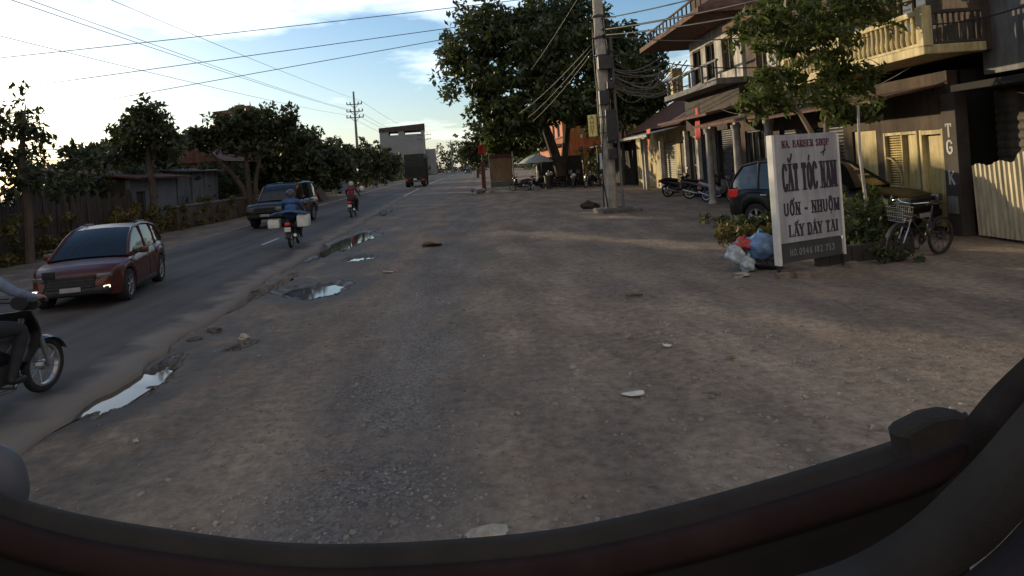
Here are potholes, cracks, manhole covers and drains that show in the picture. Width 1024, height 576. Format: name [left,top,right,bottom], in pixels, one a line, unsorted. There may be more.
pothole [219,339,260,352]
pothole [266,279,356,301]
pothole [54,352,190,432]
pothole [303,229,384,262]
